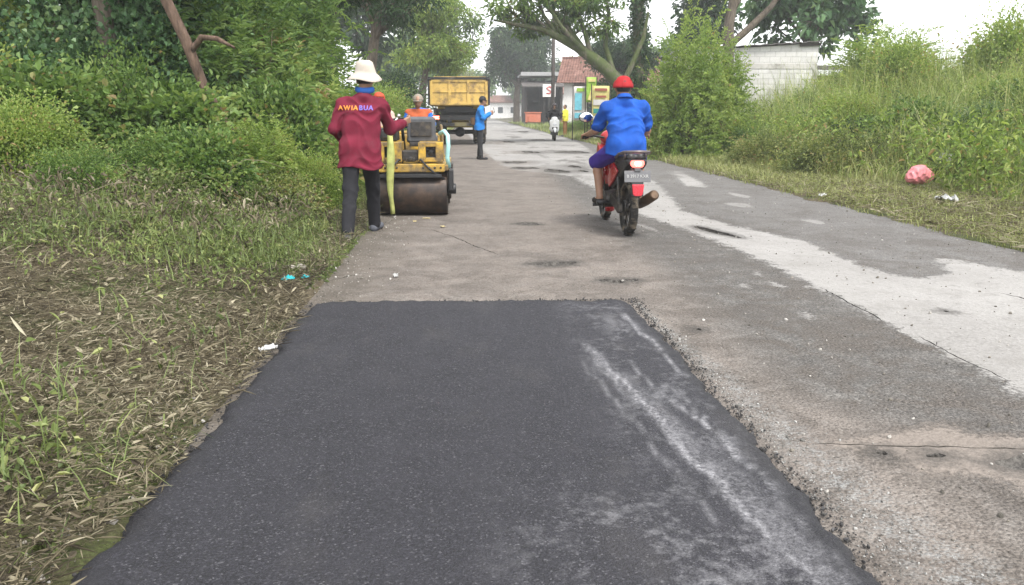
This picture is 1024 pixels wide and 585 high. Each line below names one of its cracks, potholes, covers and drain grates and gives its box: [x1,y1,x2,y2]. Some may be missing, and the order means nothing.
pothole [694,226,741,238]
crack [919,336,1002,378]
